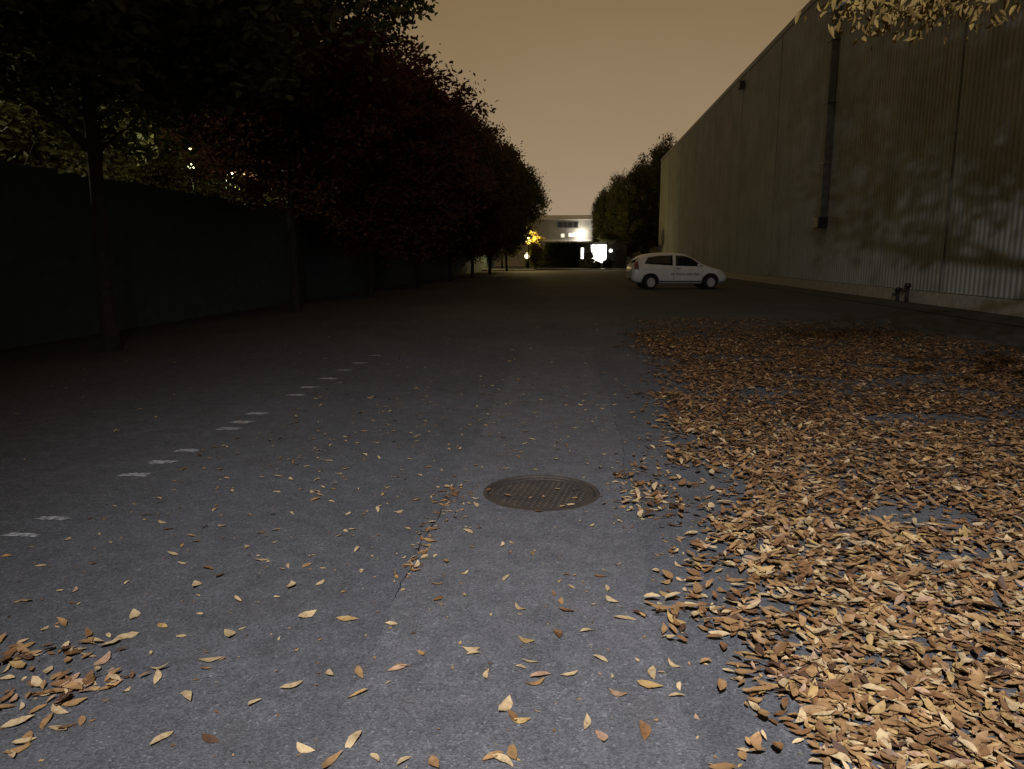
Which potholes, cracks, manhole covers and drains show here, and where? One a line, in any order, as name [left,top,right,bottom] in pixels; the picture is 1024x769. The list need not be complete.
manhole cover [483,475,600,512]
crack [376,486,455,645]
